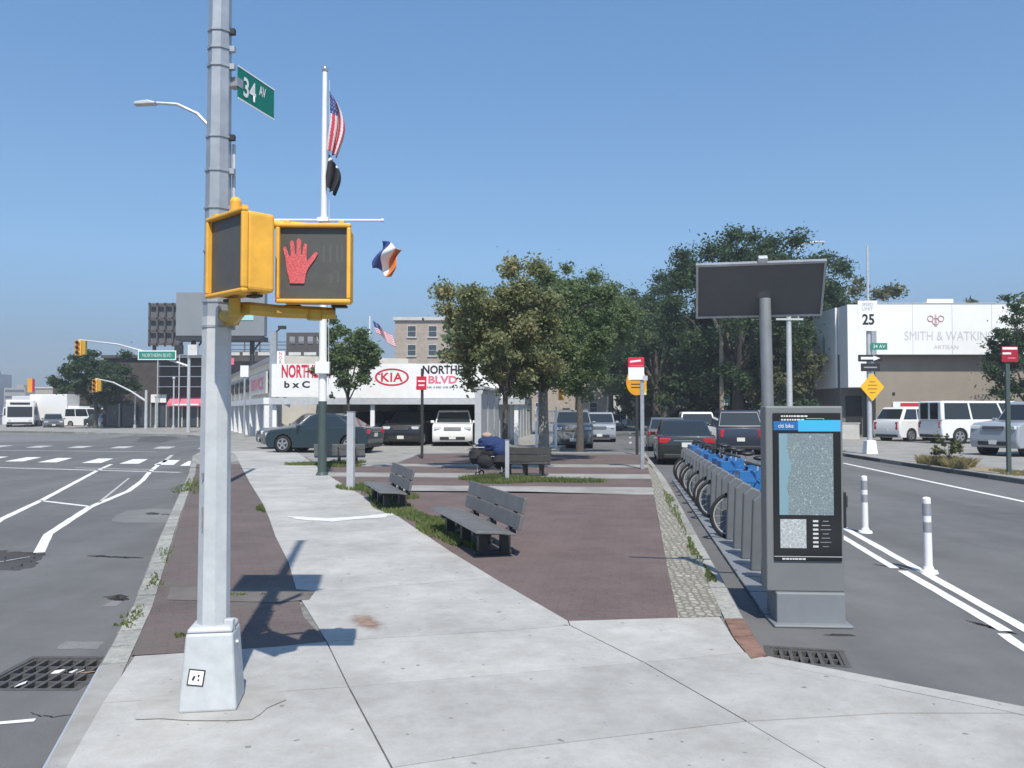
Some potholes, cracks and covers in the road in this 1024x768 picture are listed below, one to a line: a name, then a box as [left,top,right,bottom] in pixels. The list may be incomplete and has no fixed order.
drain grate [0,656,104,713]
drain grate [763,645,852,668]
